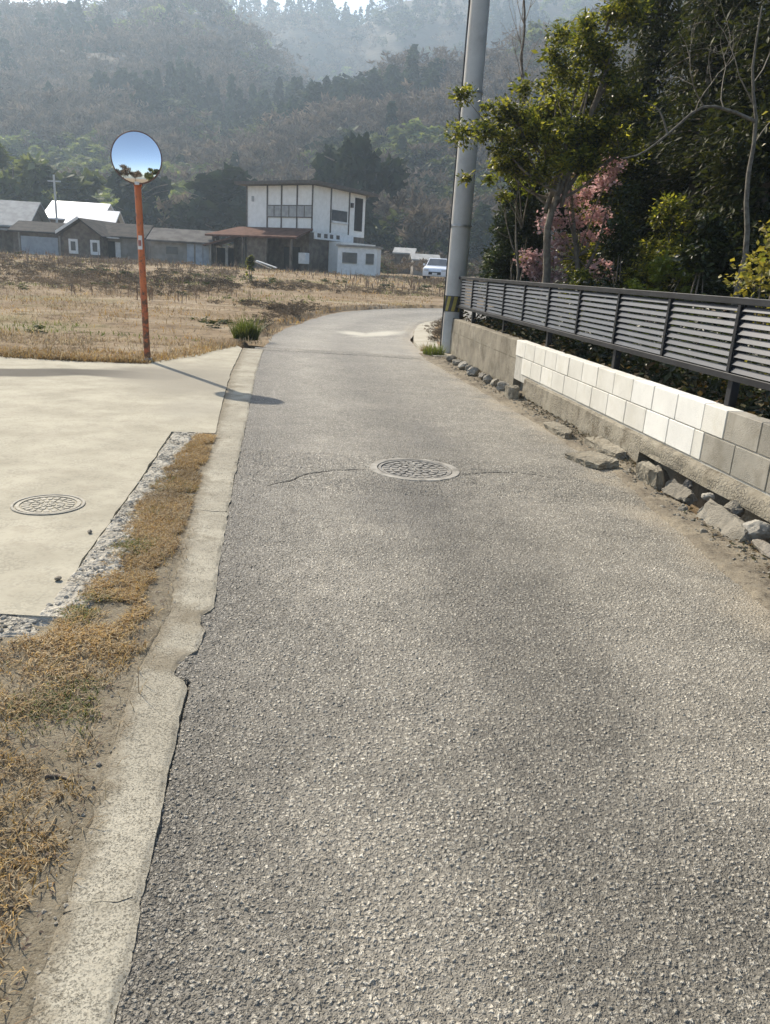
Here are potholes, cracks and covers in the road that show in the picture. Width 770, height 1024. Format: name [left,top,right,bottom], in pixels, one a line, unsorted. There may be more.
manhole cover [10,494,86,516]
manhole cover [370,458,460,481]
